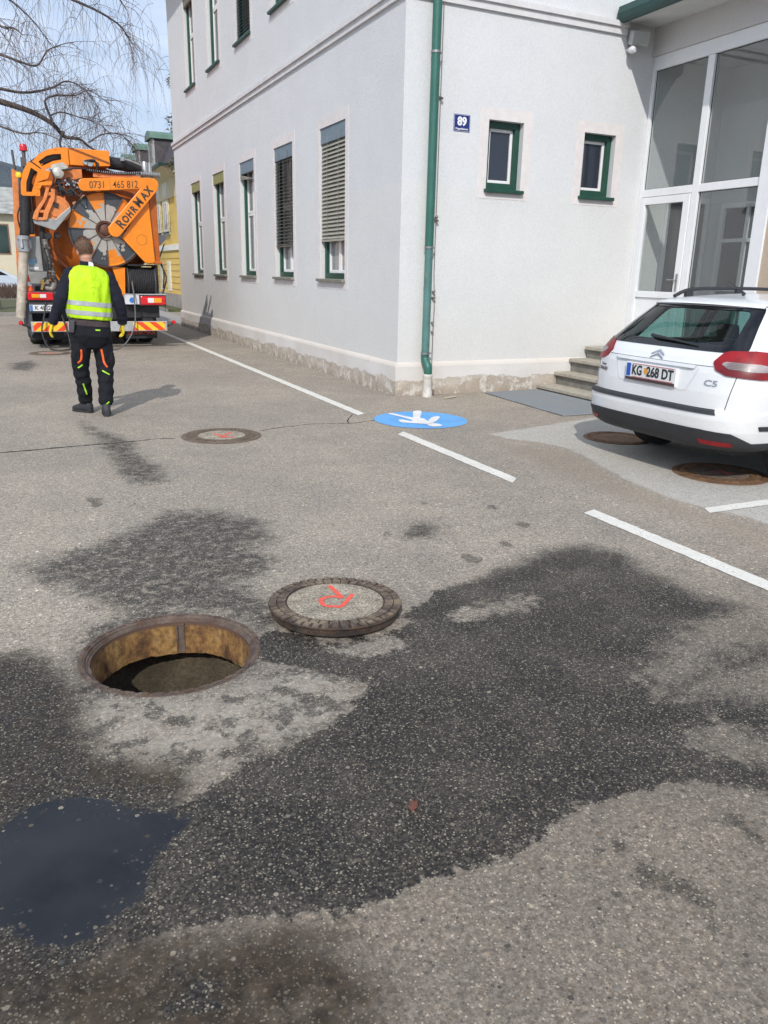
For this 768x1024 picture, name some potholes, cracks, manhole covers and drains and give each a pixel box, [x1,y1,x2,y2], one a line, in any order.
manhole cover [77,613,261,697]
manhole cover [181,428,262,444]
manhole cover [583,431,650,445]
manhole cover [268,577,402,637]
manhole cover [672,463,768,485]
